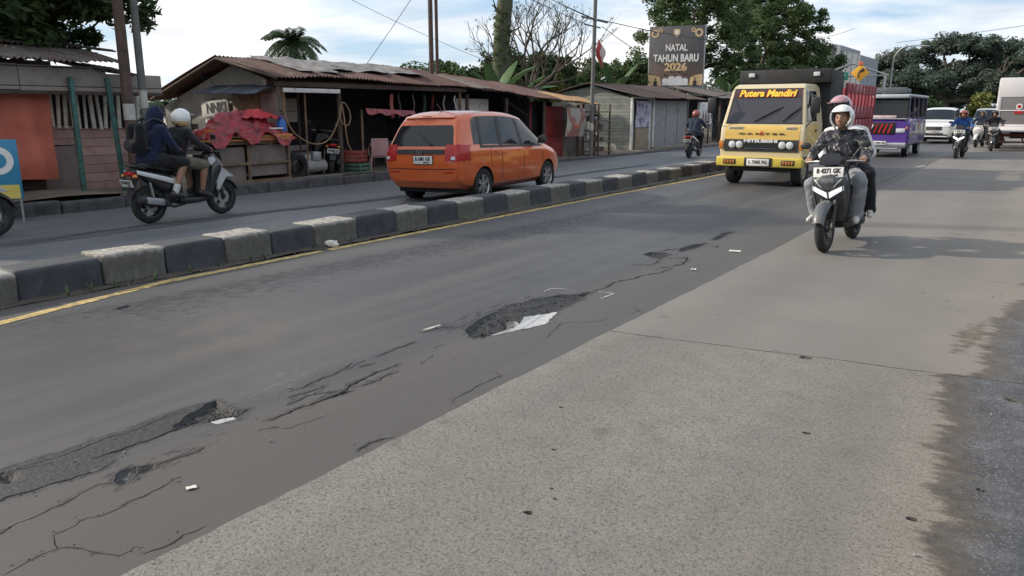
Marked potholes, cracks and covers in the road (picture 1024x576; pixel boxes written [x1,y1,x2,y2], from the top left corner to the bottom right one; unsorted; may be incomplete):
crack [0,412,206,575]
pothole [172,400,249,431]
crack [259,327,454,431]
crack [451,371,502,403]
pothole [113,464,155,486]
pothole [465,289,600,339]
crack [597,249,689,314]
